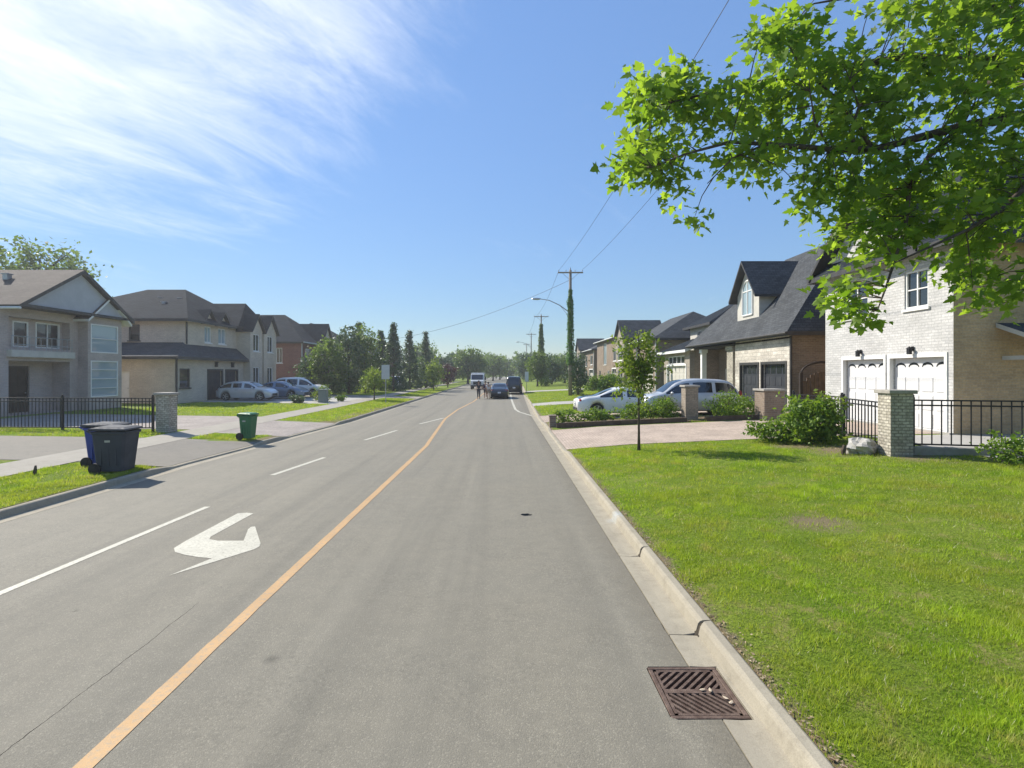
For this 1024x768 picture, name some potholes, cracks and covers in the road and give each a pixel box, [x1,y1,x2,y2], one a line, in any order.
crack [1,602,199,755]
drain grate [647,667,751,721]
